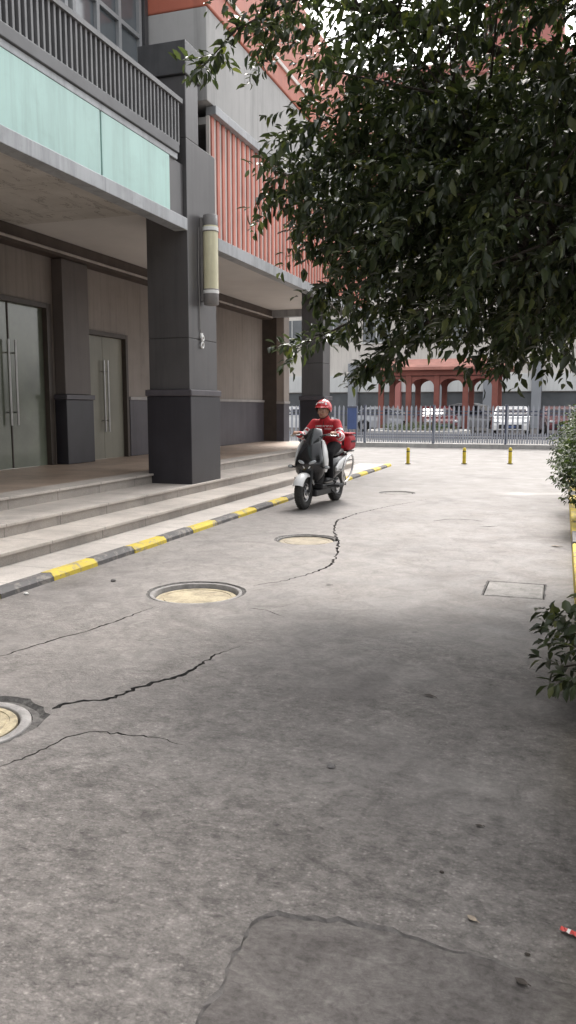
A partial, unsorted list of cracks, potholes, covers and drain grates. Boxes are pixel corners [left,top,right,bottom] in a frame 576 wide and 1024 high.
manhole cover [274,534,339,545]
crack [259,501,415,585]
utility cover [481,581,547,600]
manhole cover [146,581,246,604]
crack [2,731,186,766]
crack [2,605,237,709]
manhole cover [0,696,51,744]
